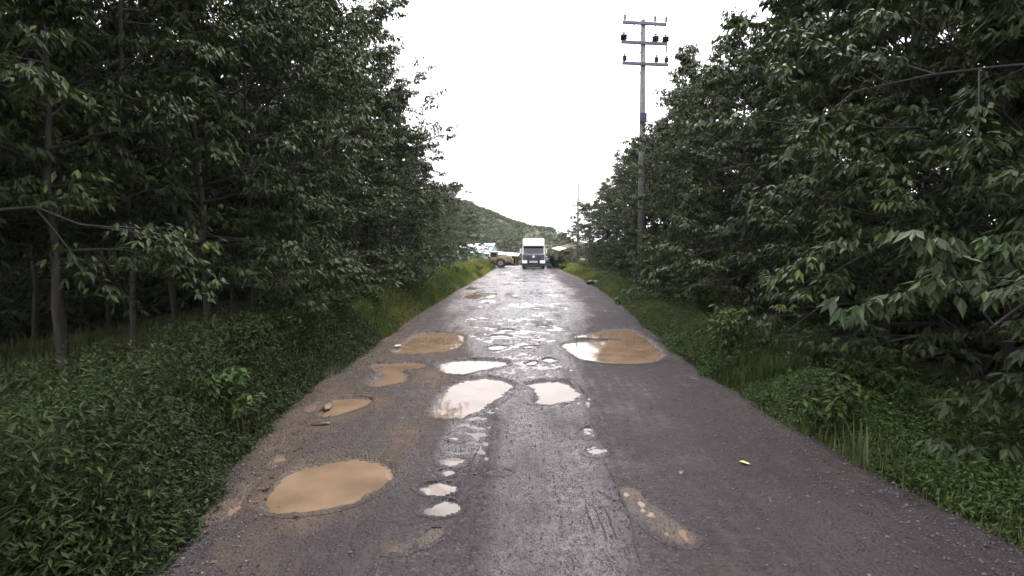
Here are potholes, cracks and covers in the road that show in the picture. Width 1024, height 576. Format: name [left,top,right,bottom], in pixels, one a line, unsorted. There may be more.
pothole [313,394,378,418]
pothole [579,442,613,458]
pothole [555,328,672,365]
pothole [412,496,470,520]
pothole [519,377,589,406]
pothole [431,356,516,376]
pothole [443,433,473,443]
pothole [364,360,433,388]
pothole [433,454,472,468]
pothole [411,477,465,499]
pothole [387,330,471,355]
pothole [420,373,523,421]
